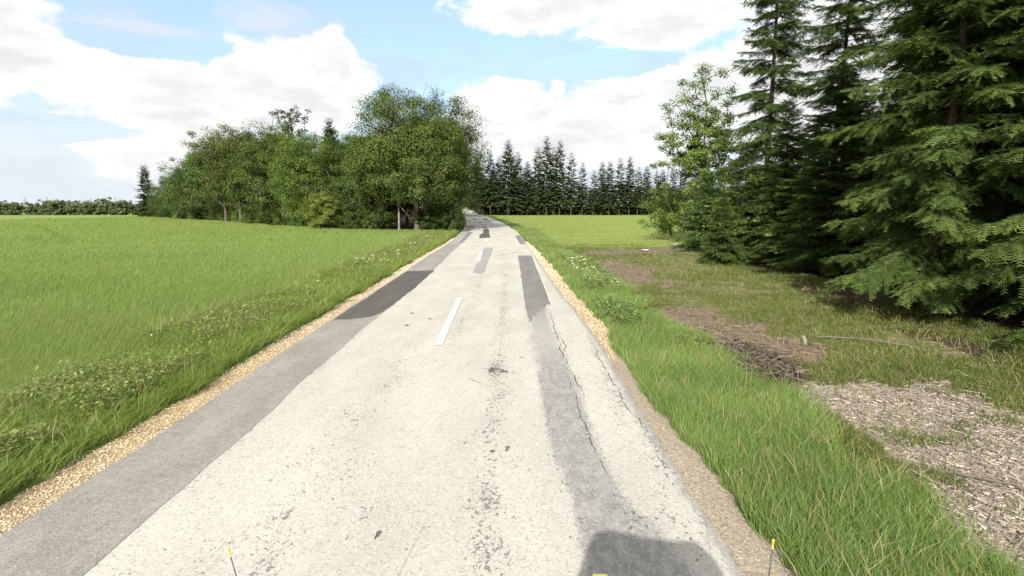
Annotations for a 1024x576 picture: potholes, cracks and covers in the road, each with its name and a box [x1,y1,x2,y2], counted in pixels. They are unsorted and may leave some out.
crack [592,342,665,469]
crack [551,316,607,473]
